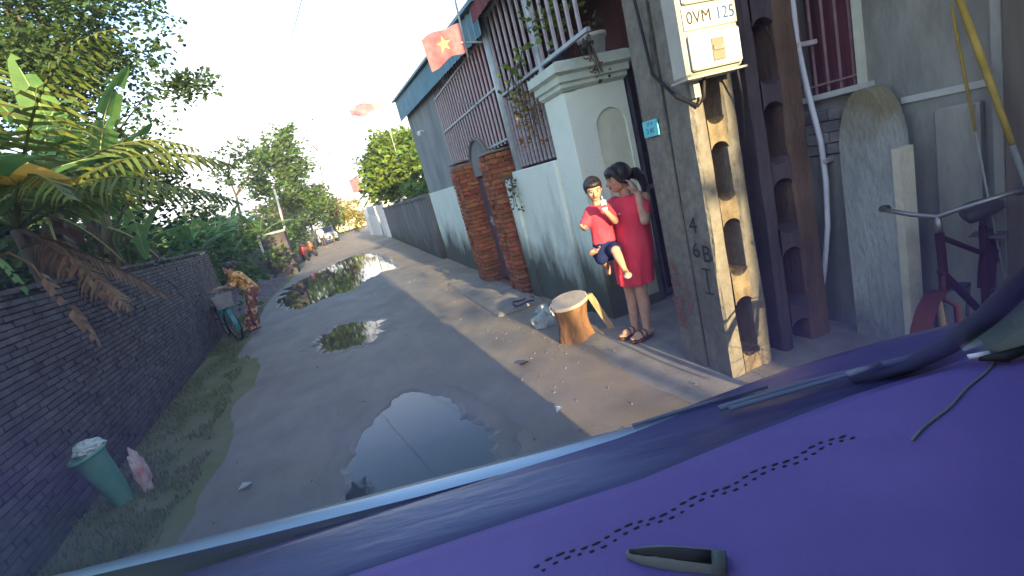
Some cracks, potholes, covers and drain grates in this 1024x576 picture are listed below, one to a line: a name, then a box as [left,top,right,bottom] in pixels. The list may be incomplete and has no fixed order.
pothole [317,383,523,507]
